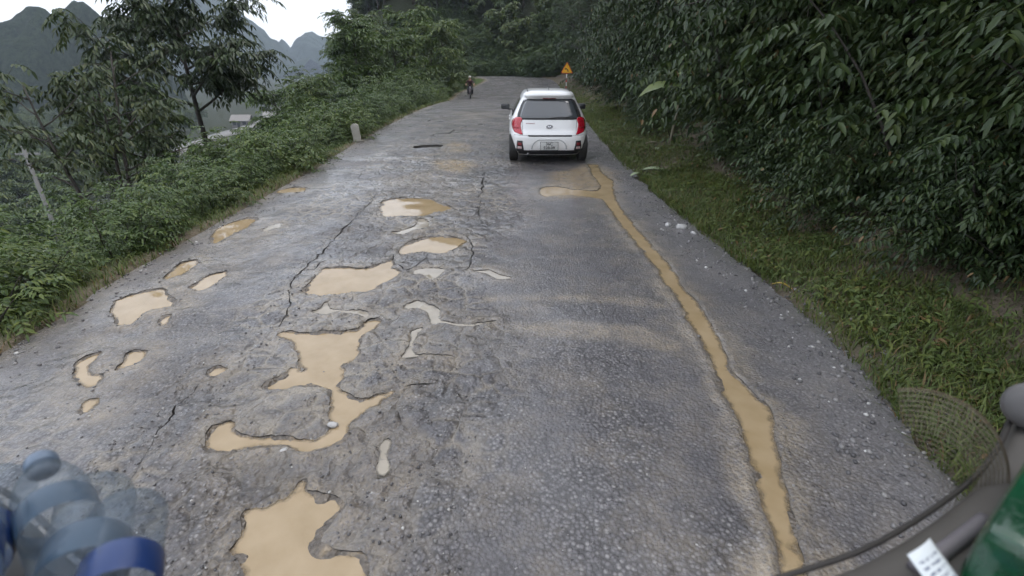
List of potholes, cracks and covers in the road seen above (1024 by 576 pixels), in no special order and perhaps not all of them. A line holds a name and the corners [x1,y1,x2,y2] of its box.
pothole [188,270,228,291]
crack [279,200,373,327]
pothole [398,235,467,255]
pothole [109,288,177,325]
pothole [72,351,104,388]
pothole [163,259,198,280]
pothole [301,259,402,296]
pothole [404,300,496,326]
pothole [204,317,396,453]
crack [127,384,199,483]
pothole [229,479,370,576]
pothole [209,217,259,243]
